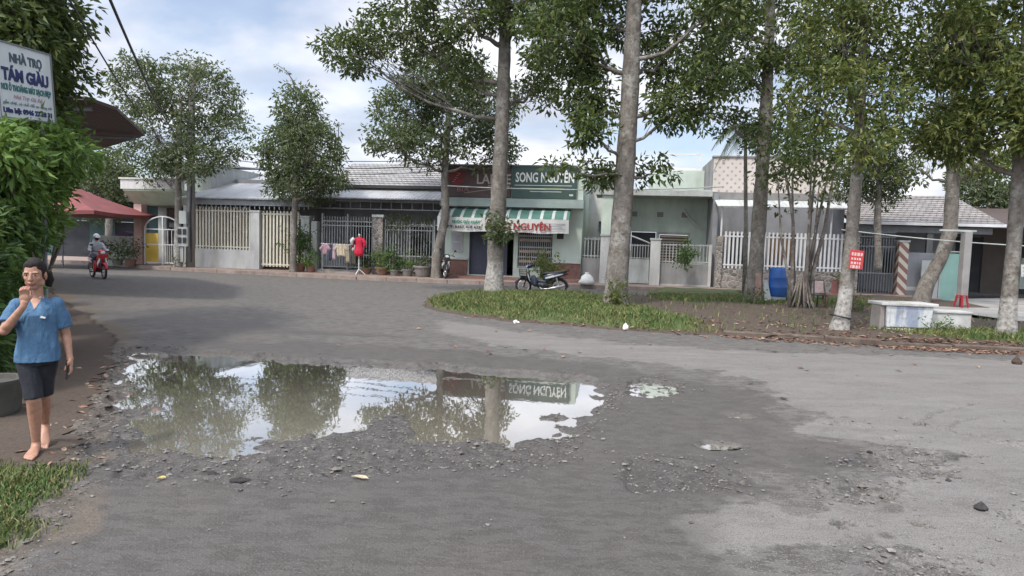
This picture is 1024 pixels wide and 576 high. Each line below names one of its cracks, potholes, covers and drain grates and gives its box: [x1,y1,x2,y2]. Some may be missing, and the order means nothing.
crack [897,402,1003,483]
pothole [621,377,688,398]
pothole [686,439,753,452]
pothole [74,345,623,486]
